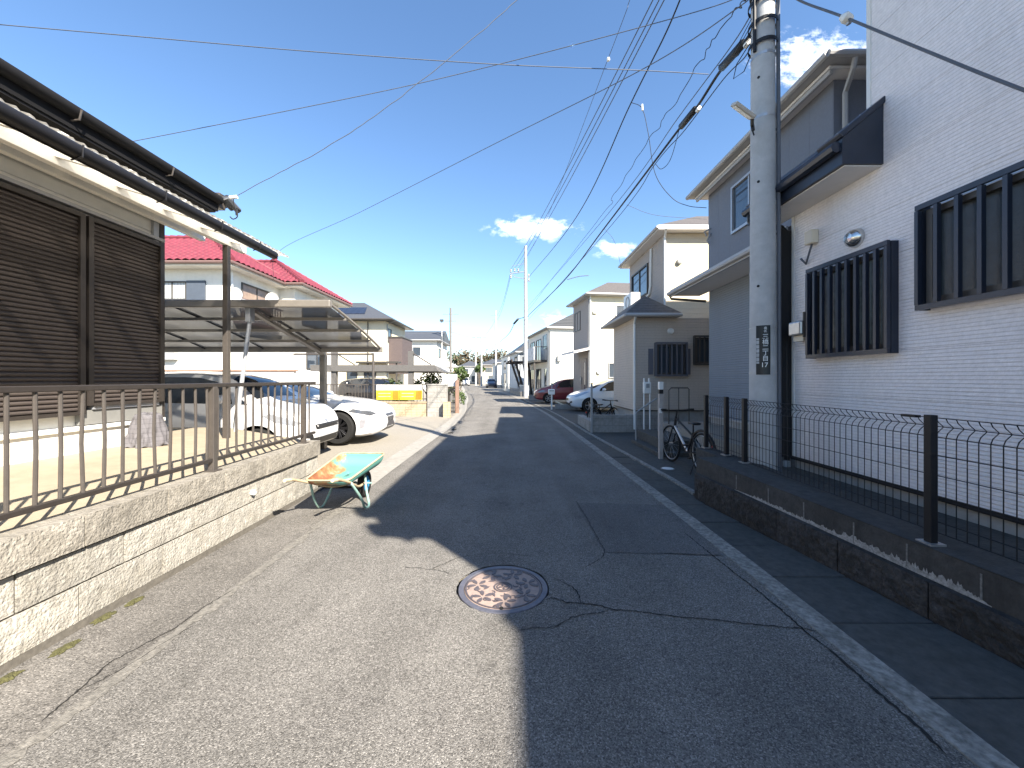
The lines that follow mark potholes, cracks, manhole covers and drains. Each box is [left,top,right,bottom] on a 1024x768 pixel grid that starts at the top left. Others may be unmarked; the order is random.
crack [515,533,947,755]
manhole cover [458,566,548,615]
